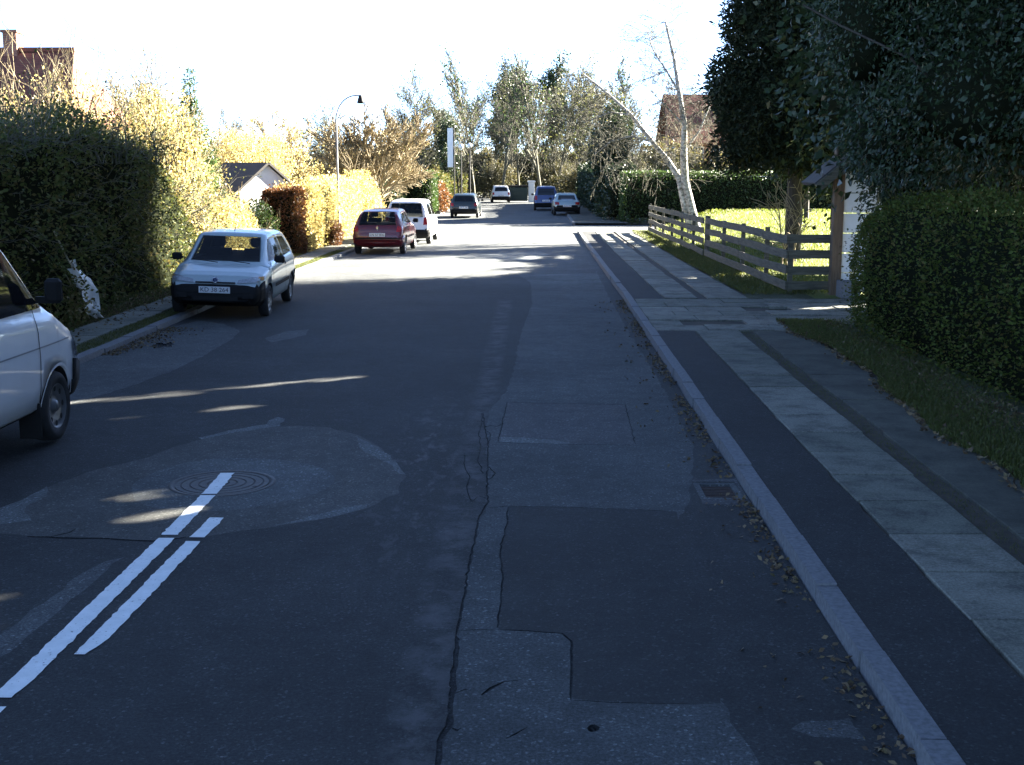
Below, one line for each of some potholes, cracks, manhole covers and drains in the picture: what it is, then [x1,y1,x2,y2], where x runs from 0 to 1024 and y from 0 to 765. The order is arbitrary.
manhole cover [168,470,276,497]
drain grate [692,482,743,499]
crack [435,413,517,765]
